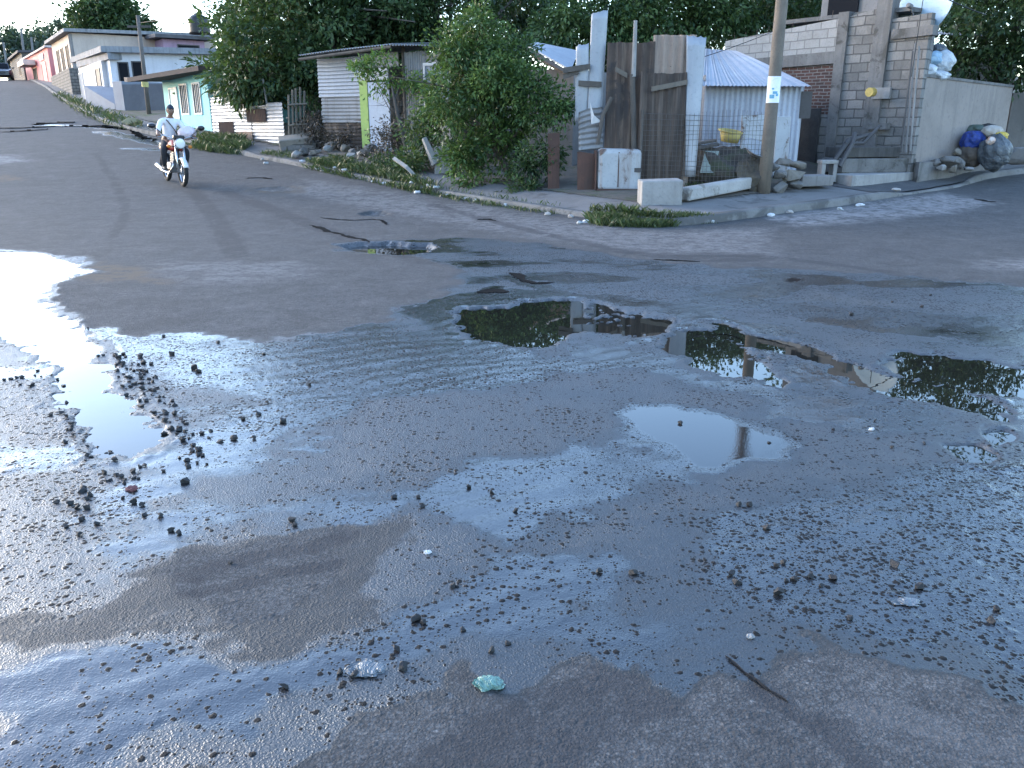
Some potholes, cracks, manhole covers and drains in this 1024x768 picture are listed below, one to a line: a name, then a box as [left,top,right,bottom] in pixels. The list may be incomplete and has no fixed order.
pothole [0,251,173,460]
crack [11,121,157,140]
pothole [334,241,438,255]
crack [312,217,387,242]
pothole [653,327,794,389]
pothole [449,297,679,349]
pothole [698,320,1022,424]
